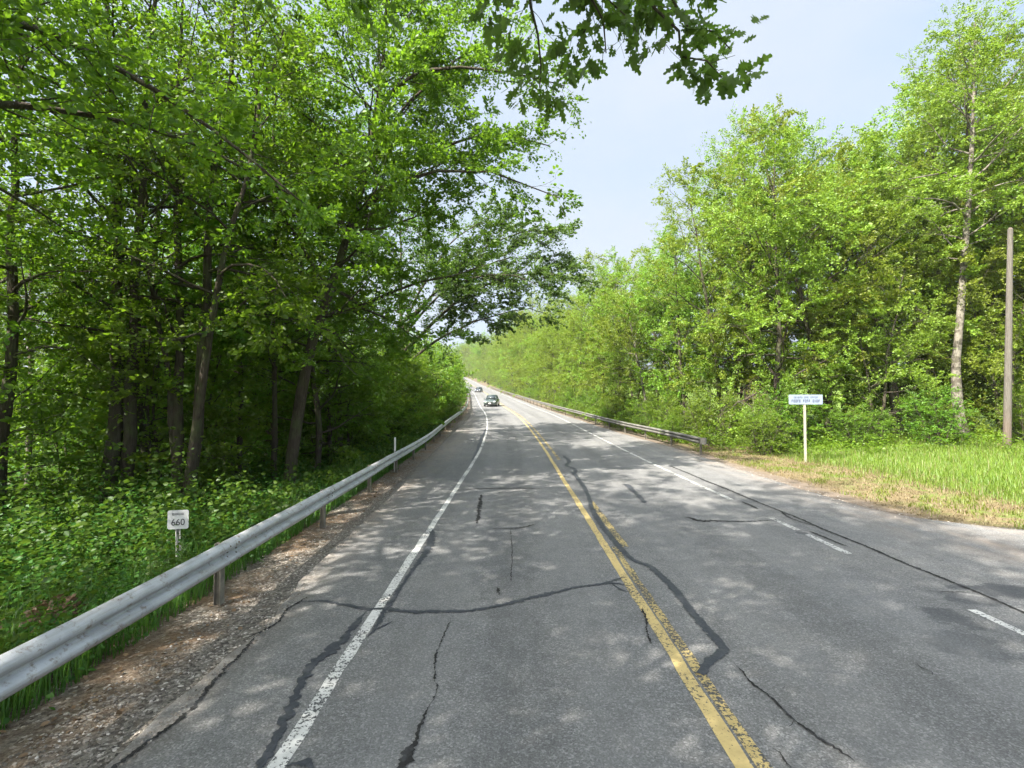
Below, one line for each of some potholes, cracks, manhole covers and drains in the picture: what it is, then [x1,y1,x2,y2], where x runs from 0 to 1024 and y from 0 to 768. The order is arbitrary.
crack [111,488,652,768]
crack [737,666,852,768]
crack [687,501,768,522]
